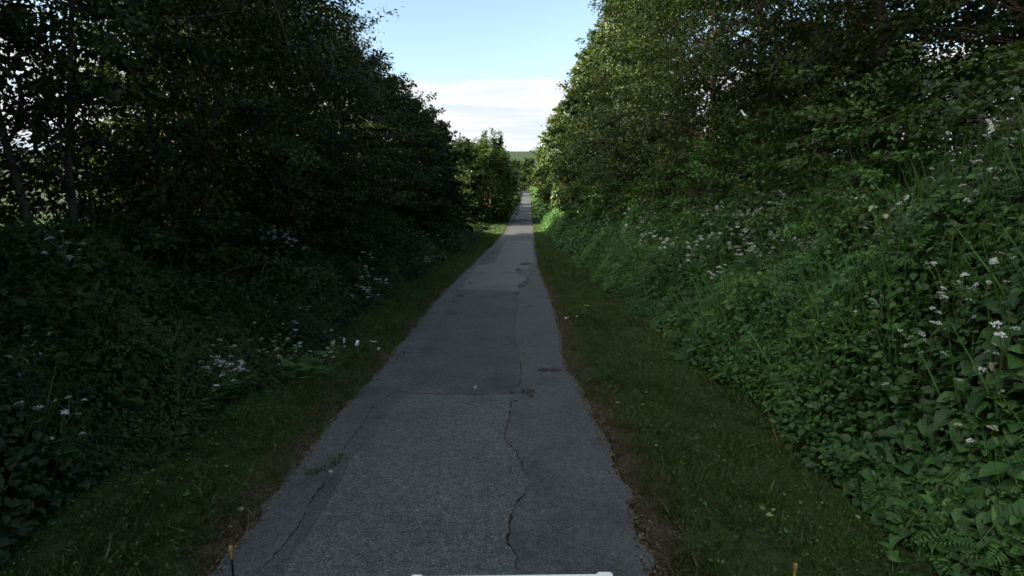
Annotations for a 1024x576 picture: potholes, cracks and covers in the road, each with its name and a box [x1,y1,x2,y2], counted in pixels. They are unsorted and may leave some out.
crack [504,361,530,569]
crack [341,378,408,454]
crack [240,455,330,569]
